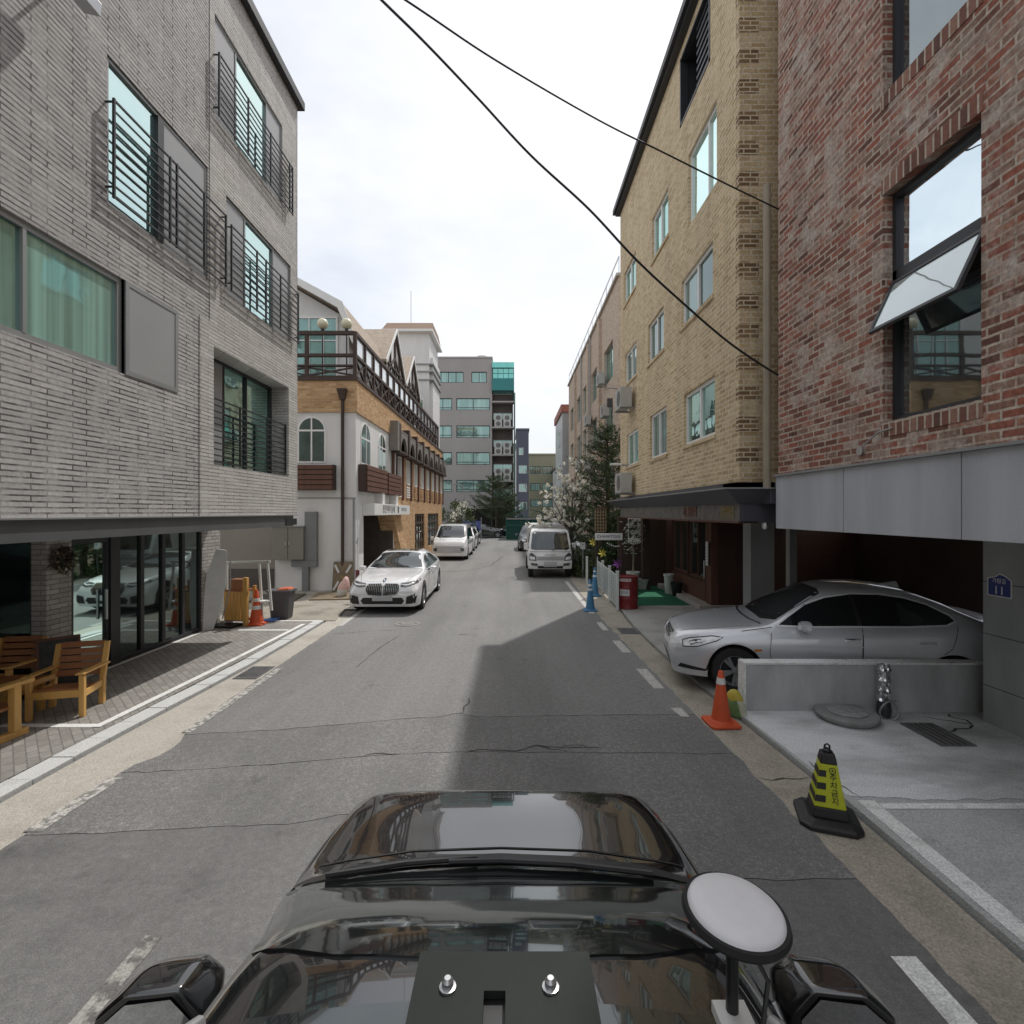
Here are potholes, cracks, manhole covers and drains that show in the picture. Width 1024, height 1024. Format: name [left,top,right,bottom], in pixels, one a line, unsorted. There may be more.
drain grate [899,723,977,746]
manhole cover [814,704,881,729]
crack [123,745,727,773]
crack [185,699,695,735]
drain grate [232,666,275,679]
